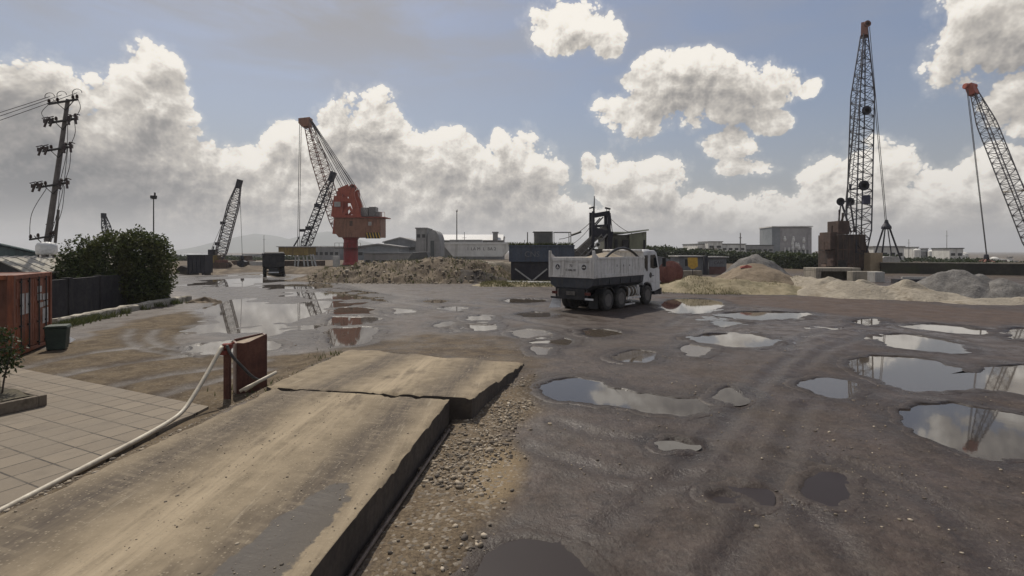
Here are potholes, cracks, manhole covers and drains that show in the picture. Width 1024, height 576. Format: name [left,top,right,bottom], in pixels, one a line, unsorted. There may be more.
pothole [643,433,707,456]
pothole [865,332,984,355]
pothole [783,465,871,513]
pothole [600,347,667,365]
pothole [887,399,1024,464]
pothole [698,383,759,409]
pothole [529,375,724,421]
pothole [783,375,873,401]
pothole [676,331,789,350]
pothole [500,327,565,341]
pothole [449,528,621,576]
pothole [835,353,1024,397]
